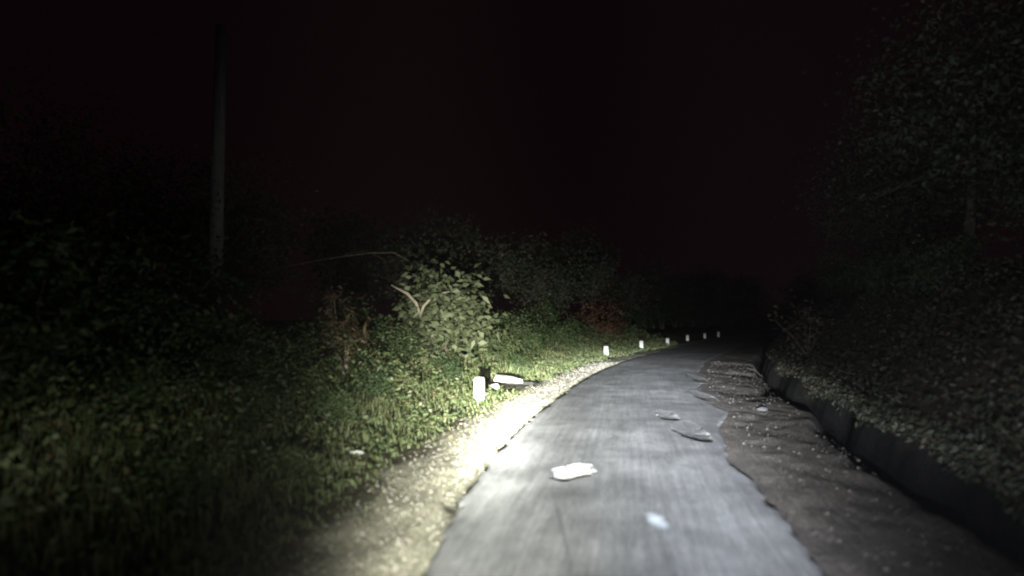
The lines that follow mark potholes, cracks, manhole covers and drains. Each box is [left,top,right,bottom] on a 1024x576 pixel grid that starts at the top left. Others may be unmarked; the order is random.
pothole [651,408,682,422]
pothole [718,362,764,380]
pothole [665,419,716,444]
pothole [688,390,721,403]
pothole [715,370,770,393]
